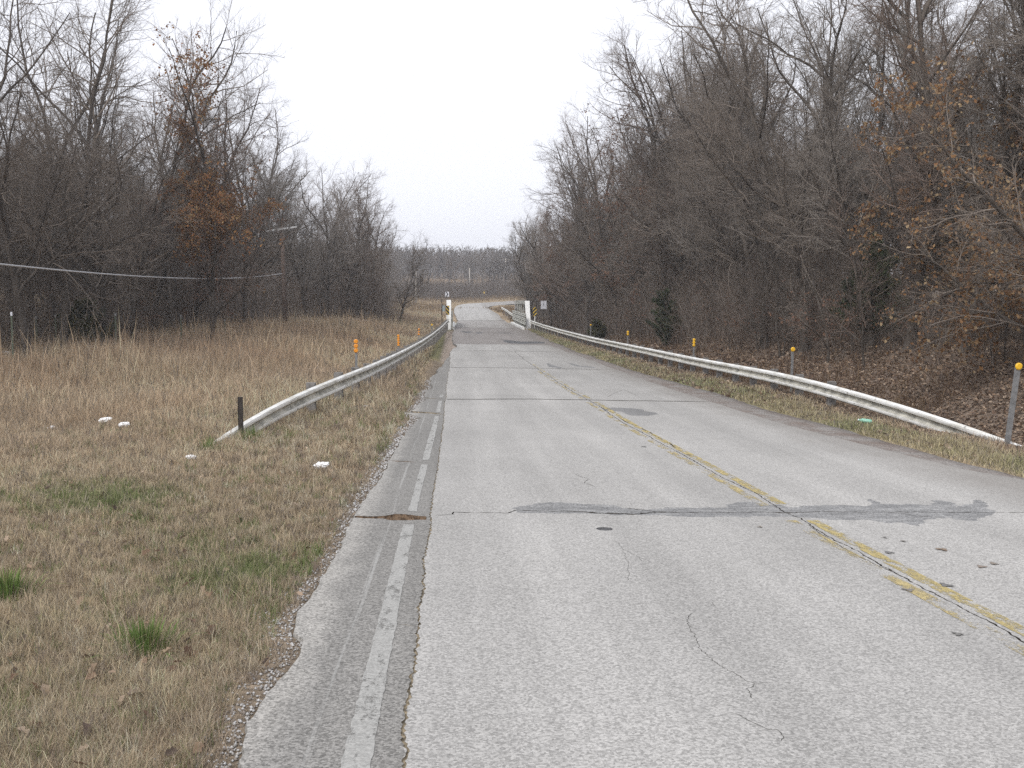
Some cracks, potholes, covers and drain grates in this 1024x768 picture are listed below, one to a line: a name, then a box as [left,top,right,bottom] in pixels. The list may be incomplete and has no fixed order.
crack [399,360,450,768]
crack [438,352,1024,643]
crack [687,614,784,742]
